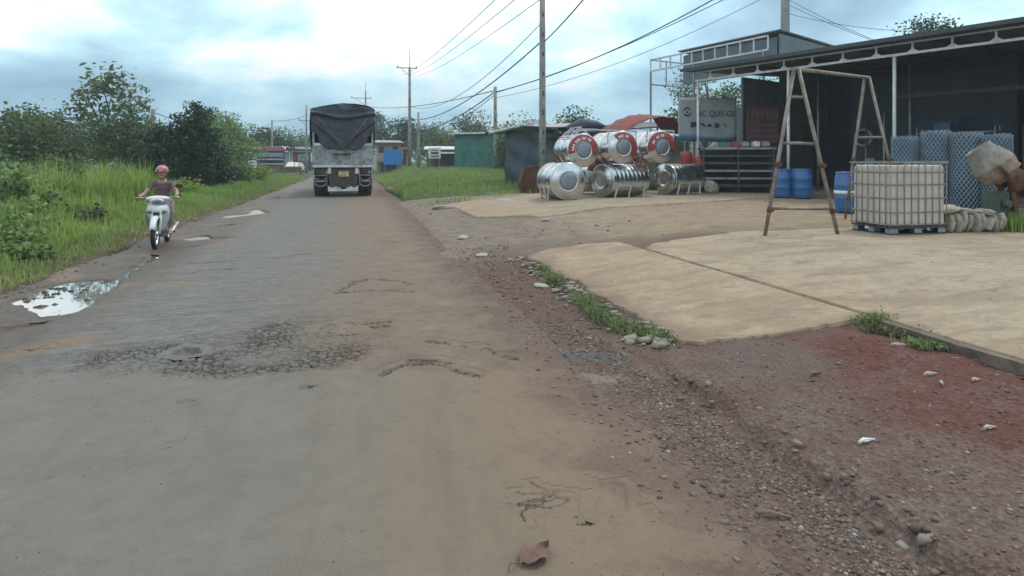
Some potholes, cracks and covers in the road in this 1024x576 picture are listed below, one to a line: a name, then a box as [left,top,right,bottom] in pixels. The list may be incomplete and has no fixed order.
crack [506,477,663,532]
pothole [155,344,213,360]
crack [9,277,529,387]
